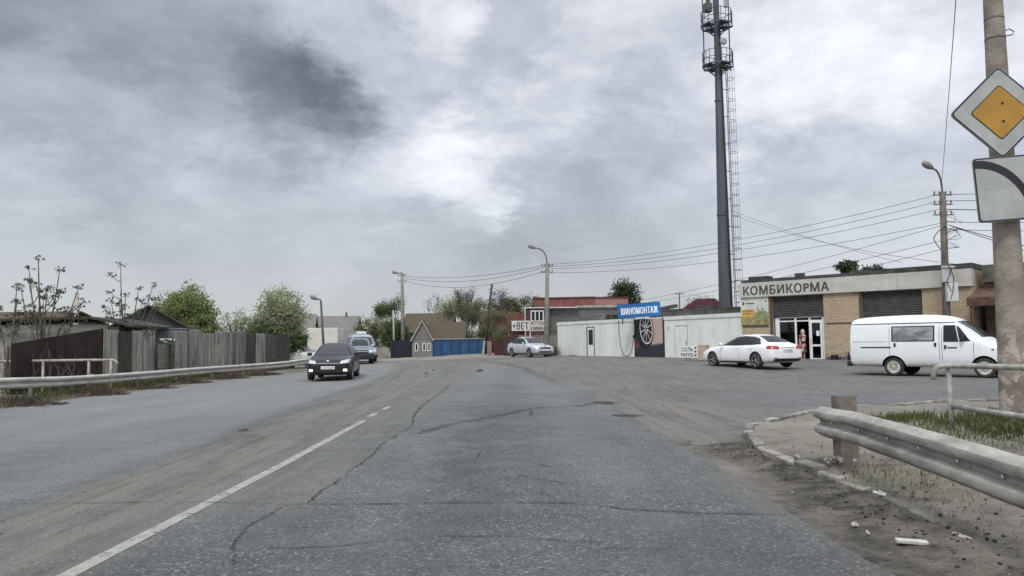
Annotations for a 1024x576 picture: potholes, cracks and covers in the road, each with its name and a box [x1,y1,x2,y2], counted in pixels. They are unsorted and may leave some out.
crack [299,393,567,504]
